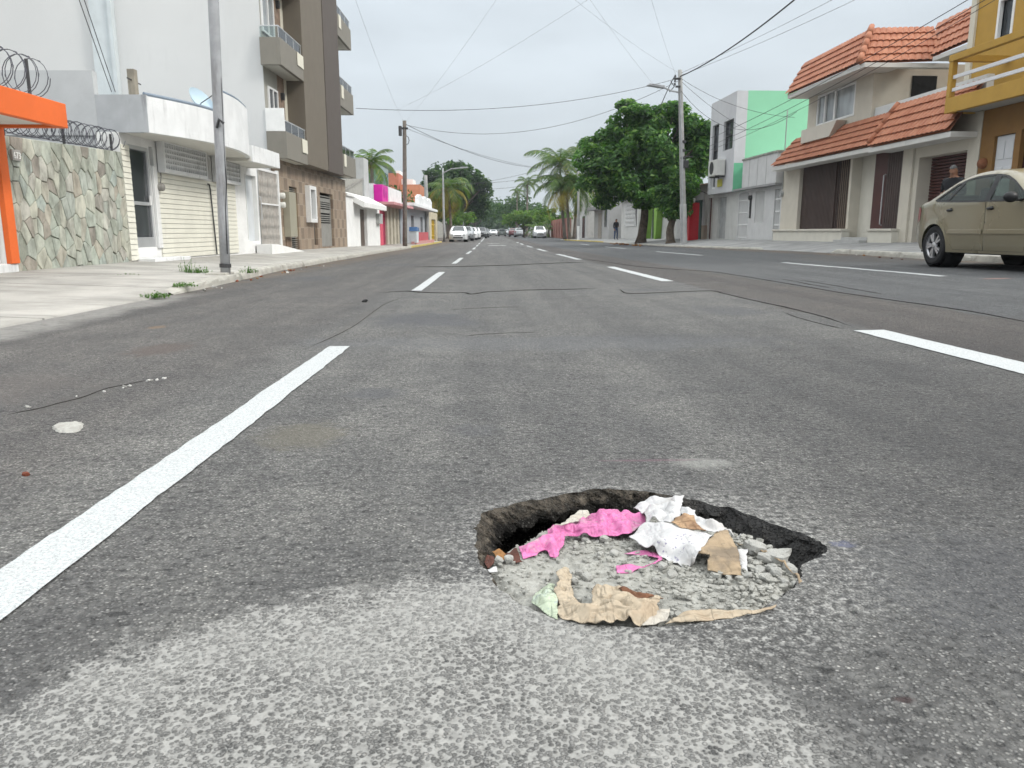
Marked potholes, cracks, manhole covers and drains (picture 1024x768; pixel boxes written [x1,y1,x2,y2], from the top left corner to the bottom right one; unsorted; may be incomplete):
crack [581,258,1024,322]
crack [308,288,599,348]
crack [621,290,853,329]
pothole [473,488,828,608]
crack [2,380,146,416]
